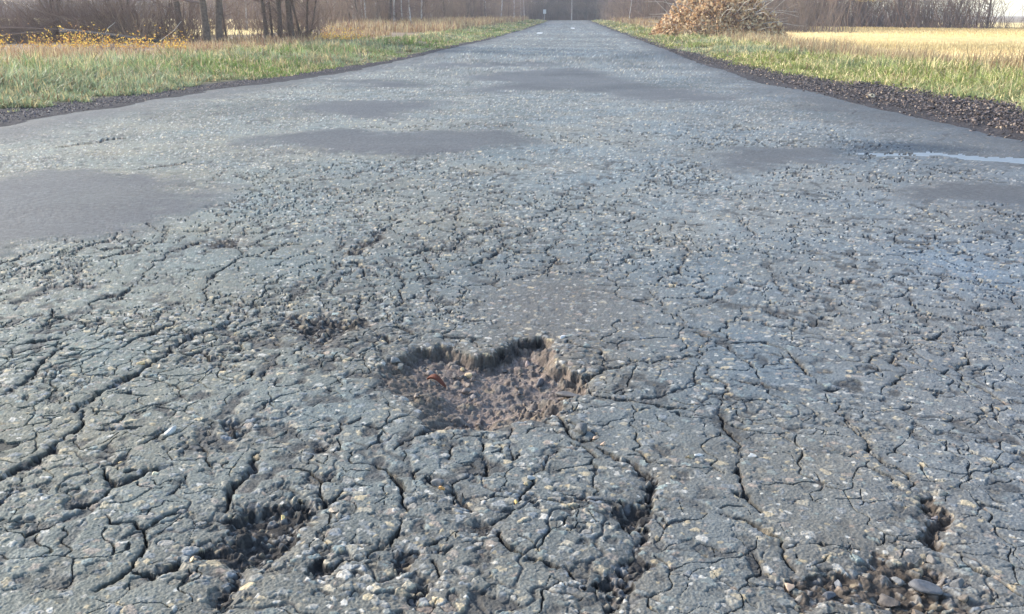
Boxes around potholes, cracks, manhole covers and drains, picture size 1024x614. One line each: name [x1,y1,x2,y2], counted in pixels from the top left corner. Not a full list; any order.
crack [0,318,506,499]
pothole [193,499,313,614]
pothole [610,473,661,534]
crack [0,486,393,614]
pothole [377,336,593,432]
crack [704,367,800,573]
crack [64,460,170,510]
crack [491,451,575,580]
crack [657,178,1024,340]
pothole [915,496,956,553]
crack [424,501,1024,614]
pothole [784,551,970,614]
